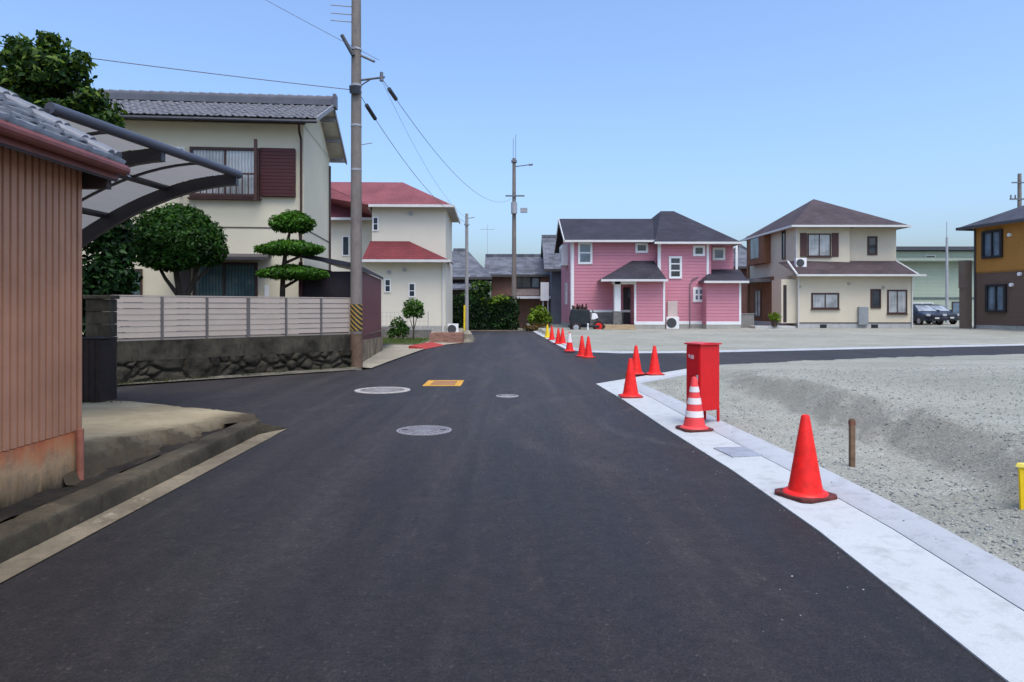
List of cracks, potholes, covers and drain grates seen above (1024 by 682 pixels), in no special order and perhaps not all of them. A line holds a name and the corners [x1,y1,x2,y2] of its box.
manhole cover [396,425,452,436]
drain grate [714,446,763,458]
